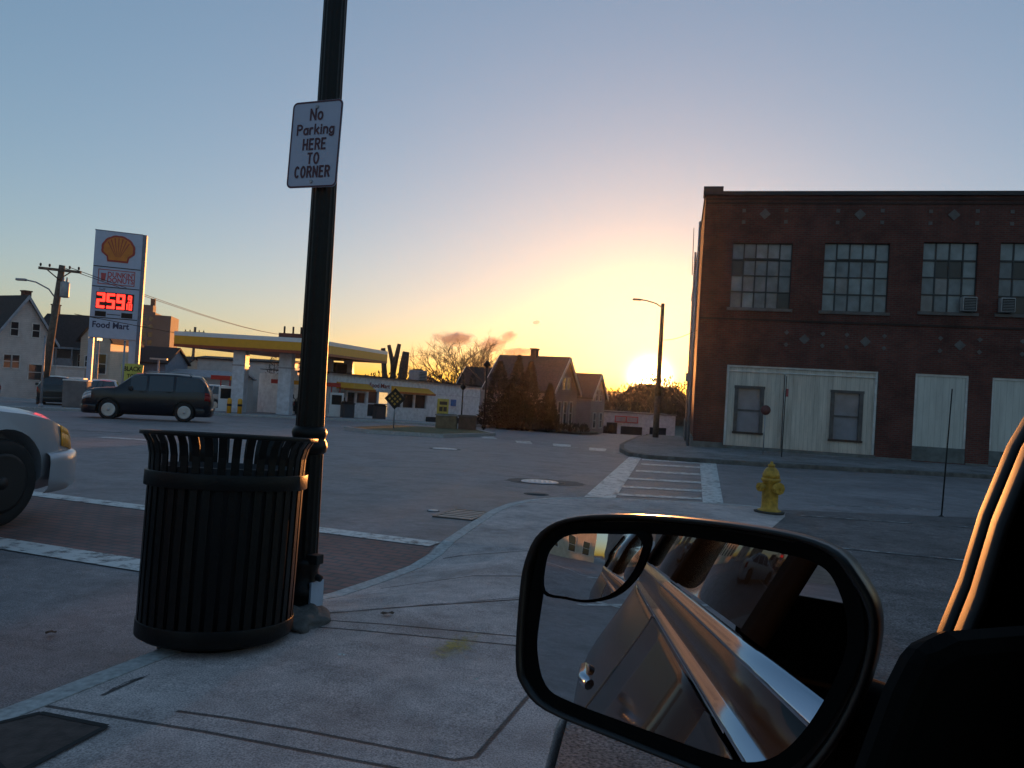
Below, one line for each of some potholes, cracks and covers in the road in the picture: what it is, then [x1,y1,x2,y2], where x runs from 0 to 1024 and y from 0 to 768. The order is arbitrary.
drain grate [432,508,487,521]
utility cover [0,711,110,768]
